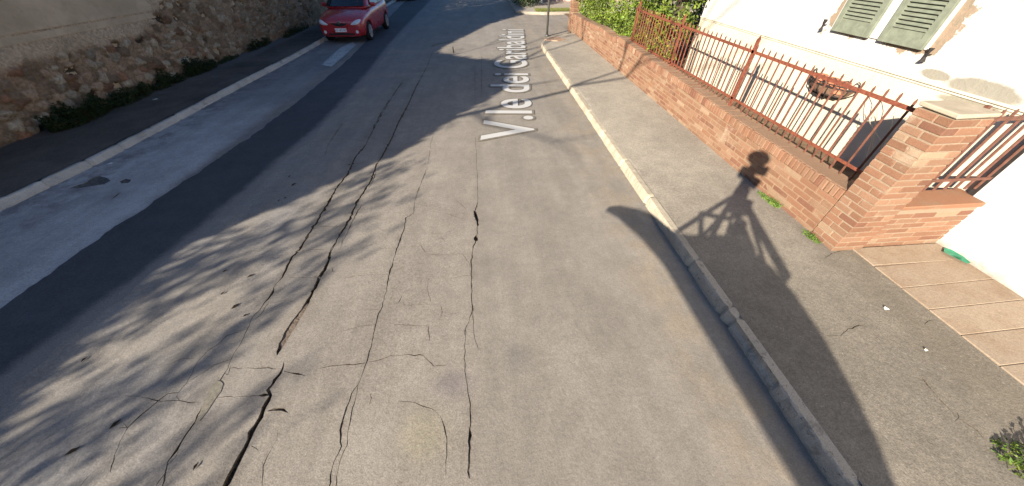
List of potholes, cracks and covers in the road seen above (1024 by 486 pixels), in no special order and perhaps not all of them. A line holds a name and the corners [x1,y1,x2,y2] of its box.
crack [80,41,471,486]
crack [920,375,983,437]
